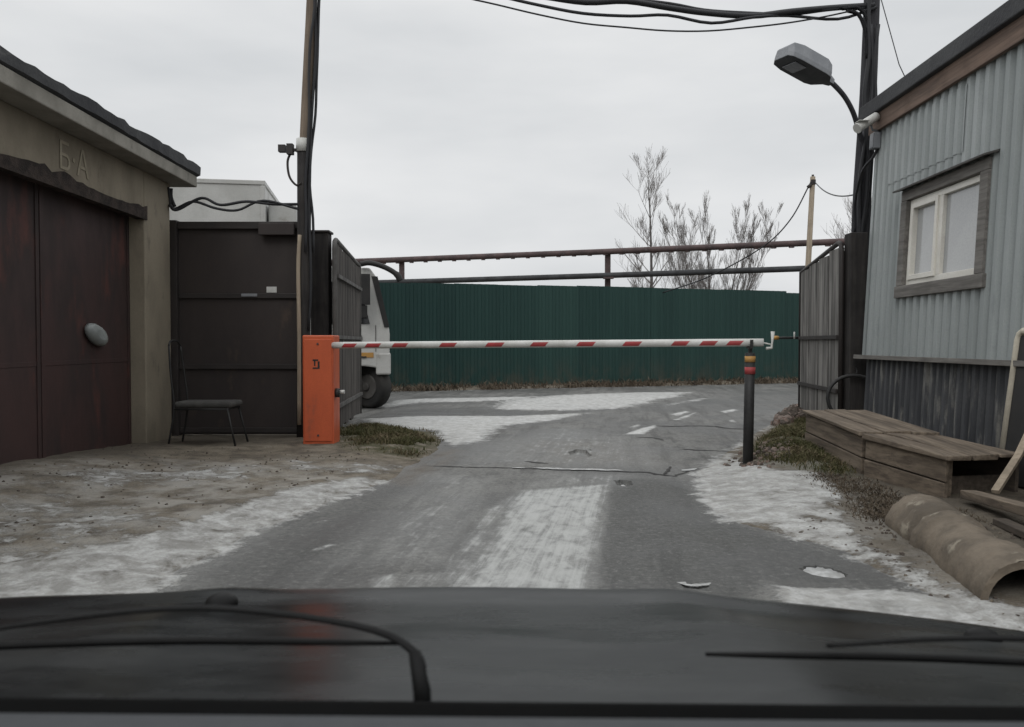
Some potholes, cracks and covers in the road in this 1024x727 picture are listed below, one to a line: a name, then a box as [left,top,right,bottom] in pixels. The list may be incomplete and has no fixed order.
pothole [607,478,645,489]
crack [424,461,699,476]
pothole [562,448,598,460]
